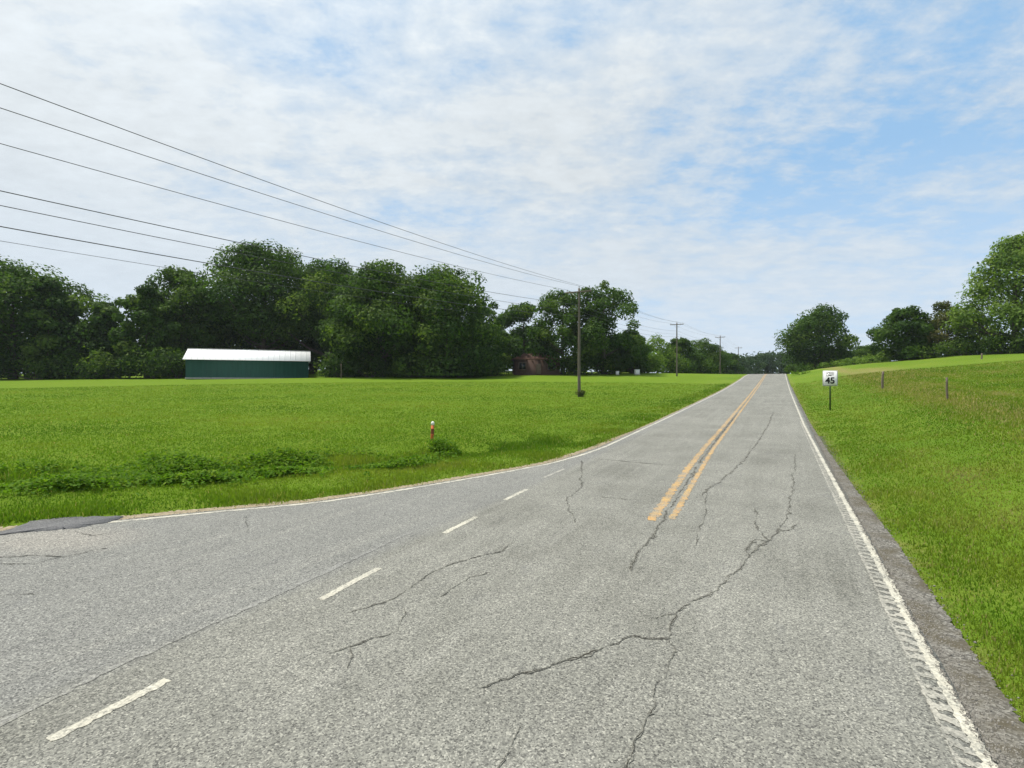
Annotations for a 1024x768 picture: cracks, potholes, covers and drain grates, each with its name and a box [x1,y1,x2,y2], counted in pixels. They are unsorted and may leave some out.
crack [3,530,124,564]
crack [482,454,798,768]
crack [332,545,508,668]
crack [629,413,773,571]
